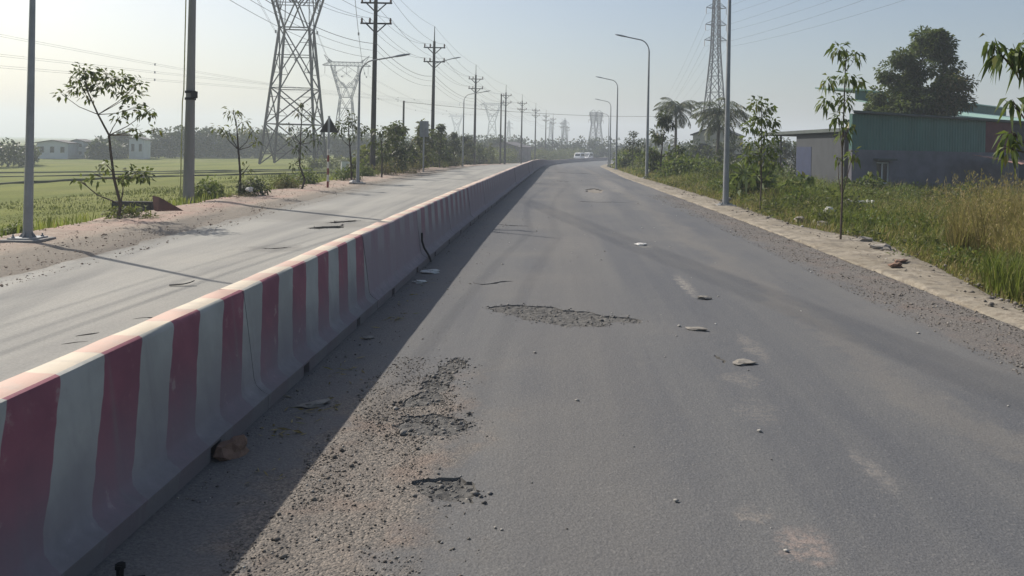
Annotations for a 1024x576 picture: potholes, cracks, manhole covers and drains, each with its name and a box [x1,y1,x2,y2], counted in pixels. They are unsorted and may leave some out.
pothole [396,467,493,511]
pothole [482,303,648,328]
pothole [391,355,482,413]
pothole [372,410,483,444]
